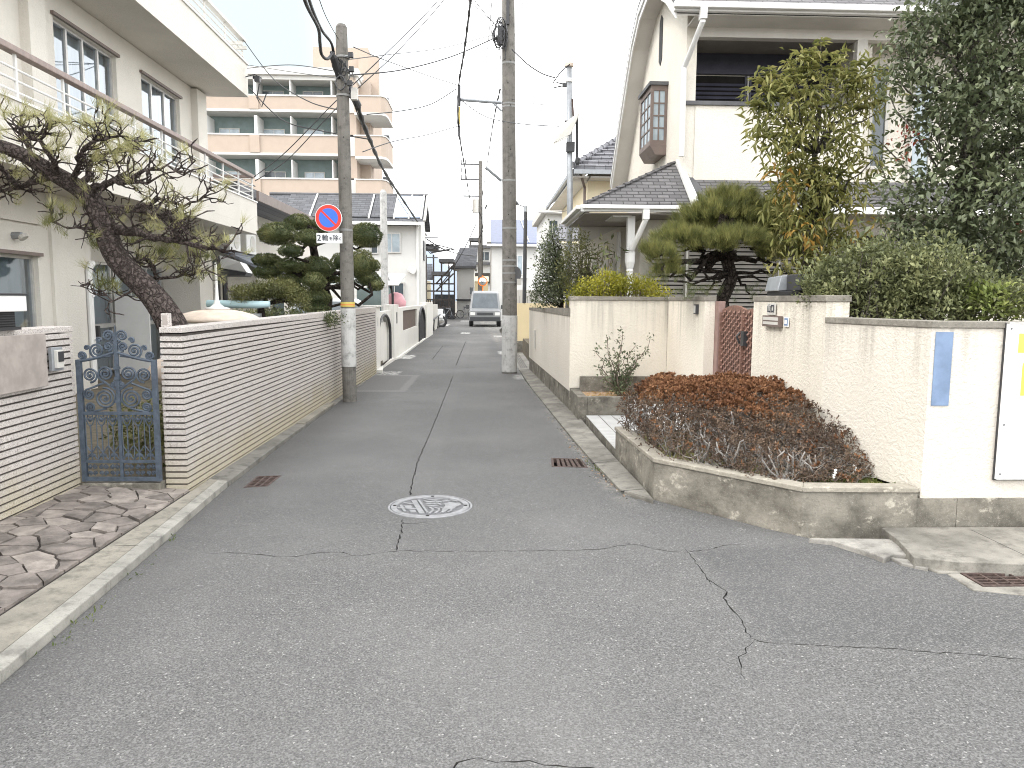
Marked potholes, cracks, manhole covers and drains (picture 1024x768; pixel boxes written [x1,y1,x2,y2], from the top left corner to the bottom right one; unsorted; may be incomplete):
drain grate [244,475,281,488]
manhole cover [388,495,472,524]
crack [213,543,1020,679]
drain grate [551,458,588,468]
crack [453,758,594,768]
drain grate [960,573,1024,587]
